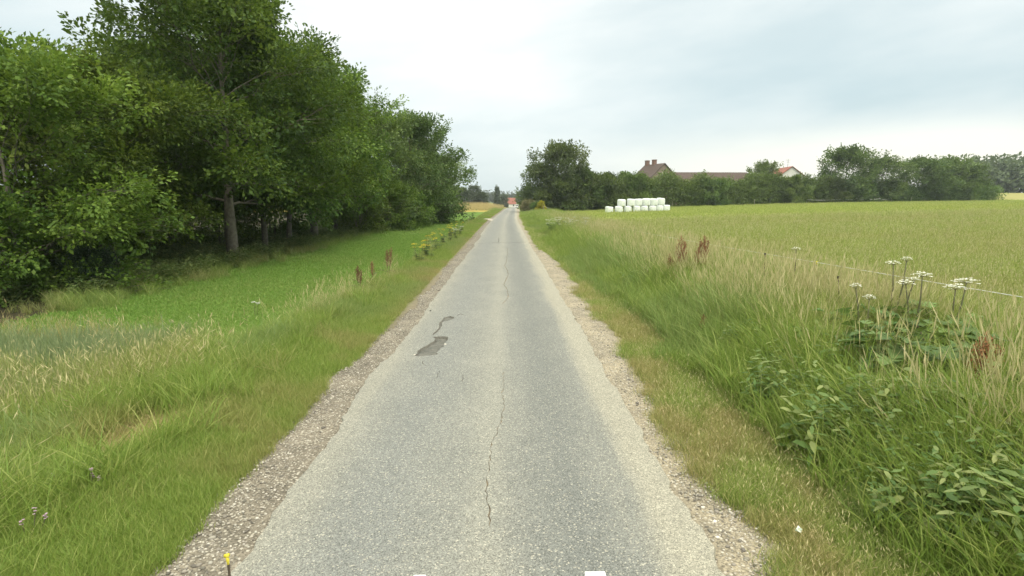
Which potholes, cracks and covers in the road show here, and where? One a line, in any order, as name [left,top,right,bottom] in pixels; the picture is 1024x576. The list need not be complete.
crack [485,377,505,526]
